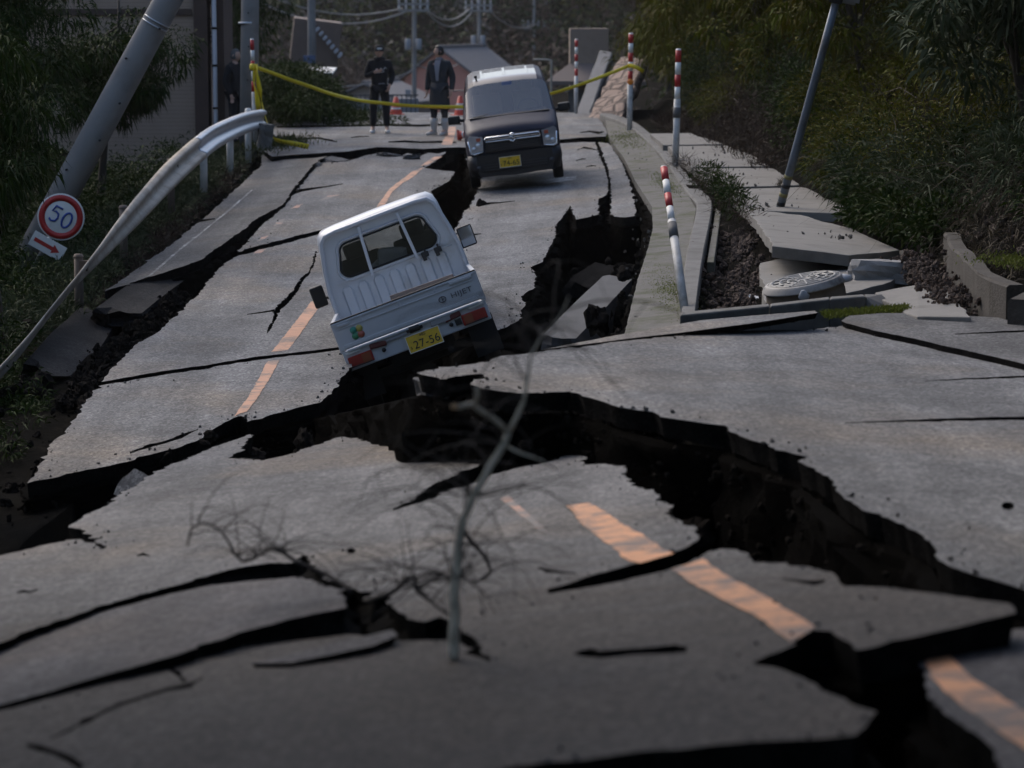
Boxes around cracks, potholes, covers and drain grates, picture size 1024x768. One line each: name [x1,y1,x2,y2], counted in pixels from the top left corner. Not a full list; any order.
manhole cover [763,270,853,305]
crack [247,252,318,333]
crack [19,558,481,768]
crack [285,165,315,207]
crack [290,184,341,200]
crack [102,348,348,385]
crack [25,395,1024,687]
